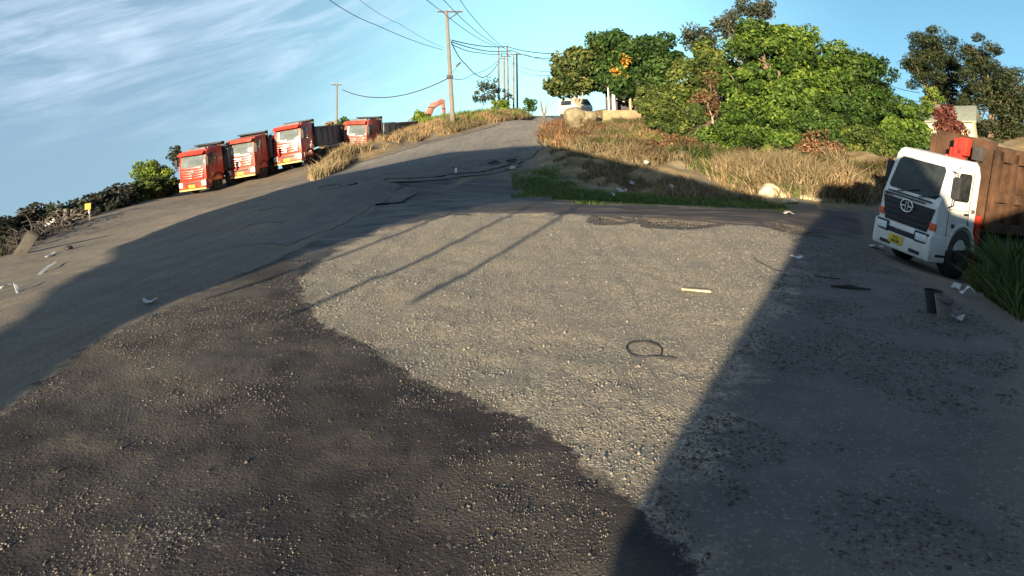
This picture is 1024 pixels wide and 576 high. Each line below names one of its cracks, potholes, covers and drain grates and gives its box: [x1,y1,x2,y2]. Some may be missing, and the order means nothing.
pothole [629,216,729,229]
pothole [586,215,636,225]
crack [316,164,523,205]
